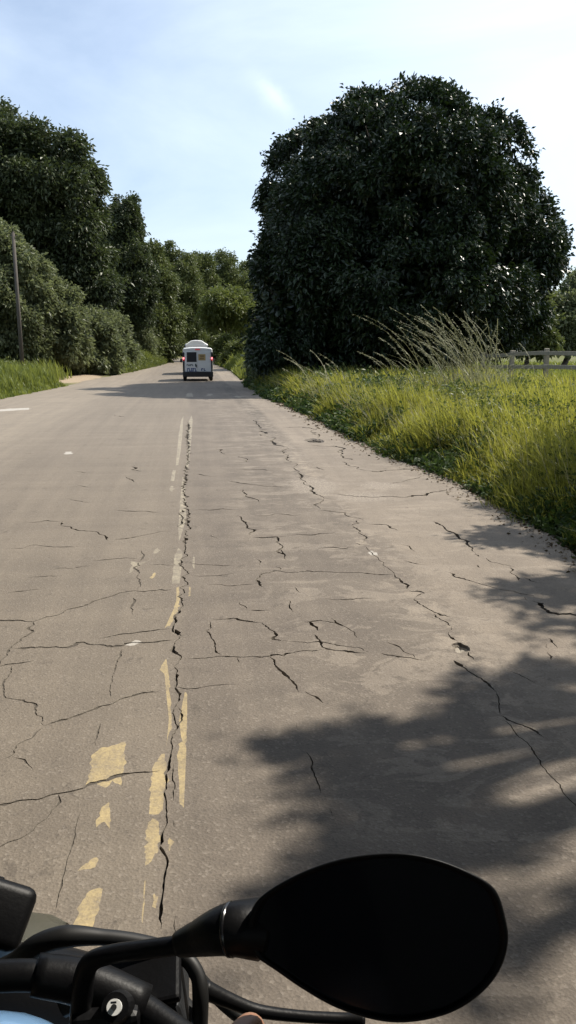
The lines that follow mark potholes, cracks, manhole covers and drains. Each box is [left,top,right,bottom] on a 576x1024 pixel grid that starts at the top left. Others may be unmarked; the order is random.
crack [0,420,576,929]
pothole [452,642,470,653]
